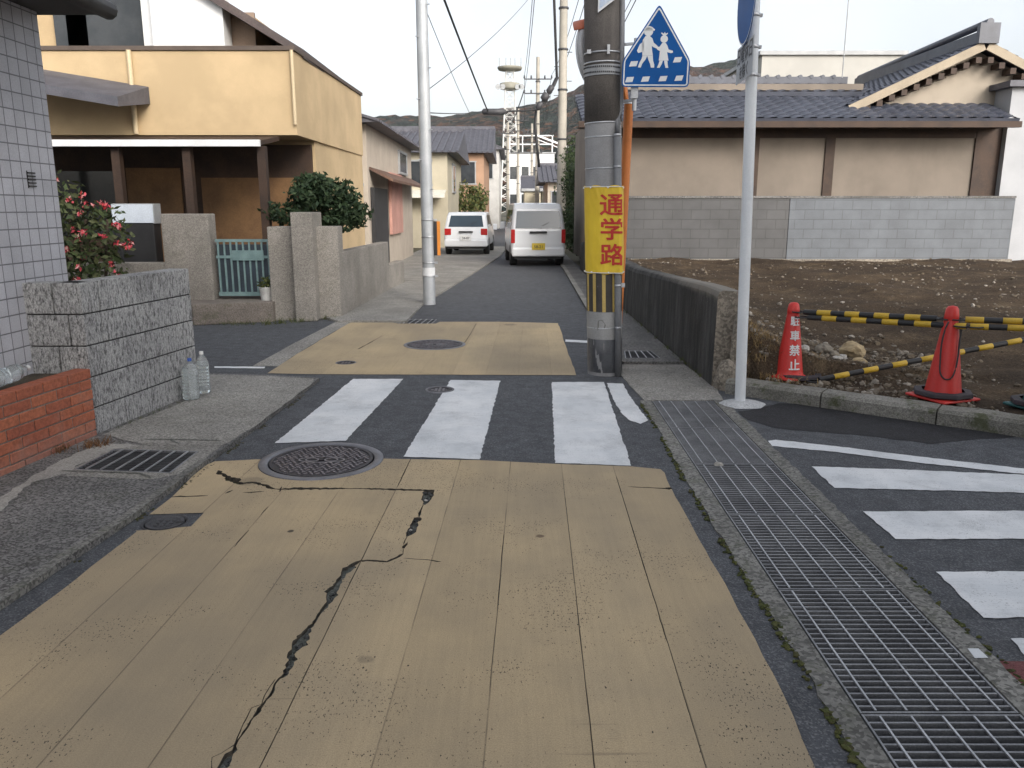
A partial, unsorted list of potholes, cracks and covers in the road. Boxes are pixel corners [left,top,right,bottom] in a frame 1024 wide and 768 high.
manhole cover [258,442,384,481]
drain grate [728,515,897,591]
manhole cover [404,339,466,350]
drain grate [652,401,739,428]
crack [174,470,441,768]
drain grate [861,714,1024,768]
manhole cover [140,514,189,531]
drain grate [694,464,824,516]
drain grate [670,428,774,464]
drain grate [74,449,198,473]
drain grate [778,590,1019,716]
